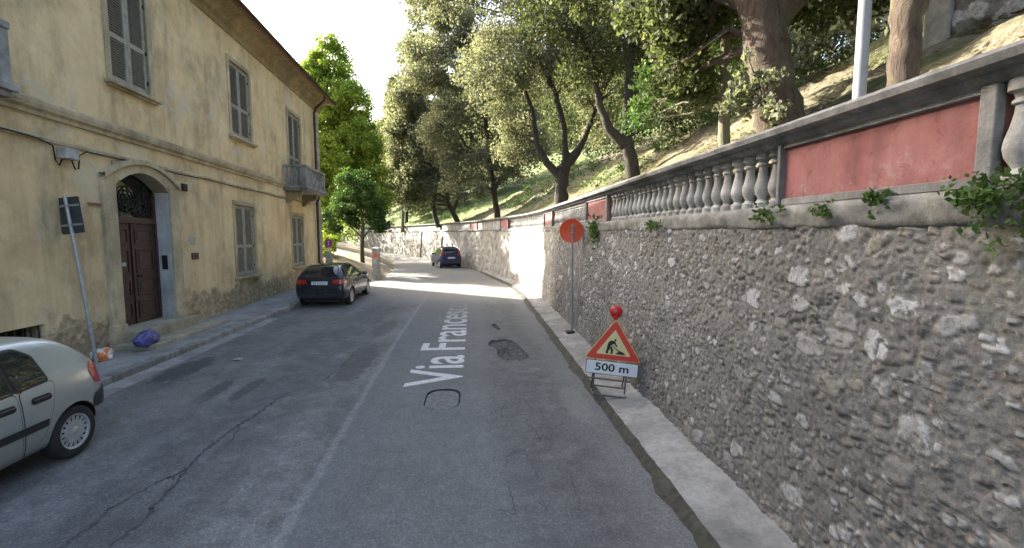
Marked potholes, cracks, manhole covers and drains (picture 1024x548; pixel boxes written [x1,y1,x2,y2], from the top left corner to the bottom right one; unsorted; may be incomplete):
crack [488,367,580,516]
pothole [488,339,530,361]
crack [59,391,292,548]
